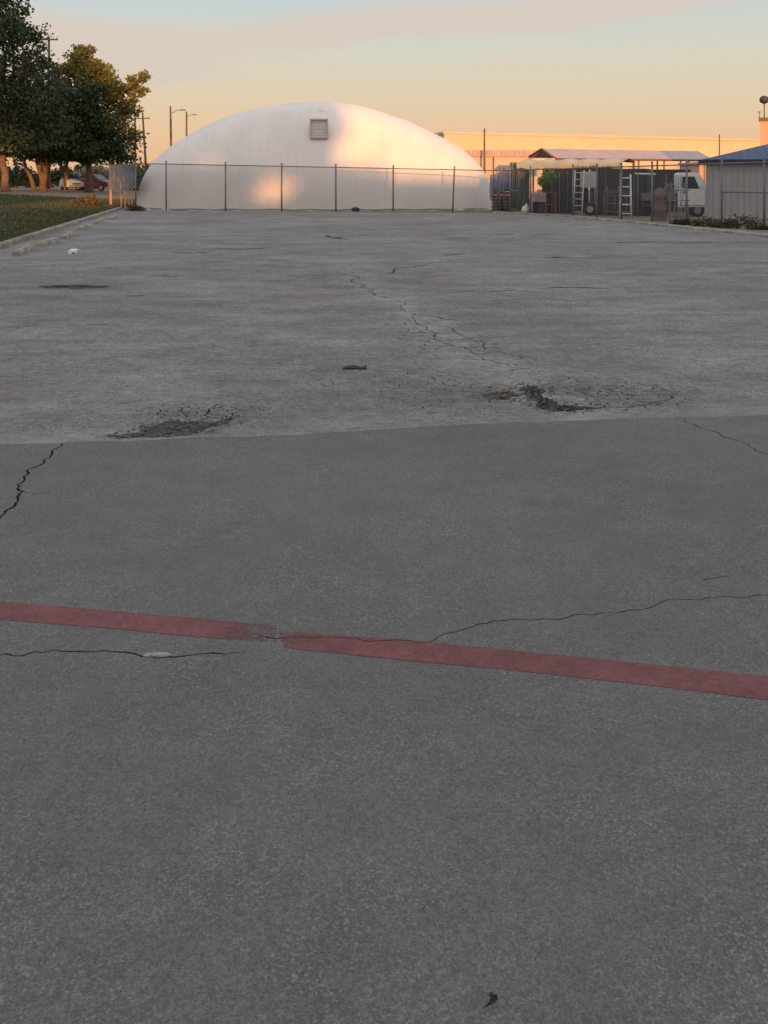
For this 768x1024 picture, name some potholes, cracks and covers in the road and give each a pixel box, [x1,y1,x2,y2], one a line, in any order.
crack [0,443,63,518]
crack [356,369,766,454]
crack [385,300,535,371]
crack [0,650,244,659]
pothole [509,382,606,417]
pothole [471,387,535,403]
crack [252,576,758,643]
pothole [91,413,245,439]
